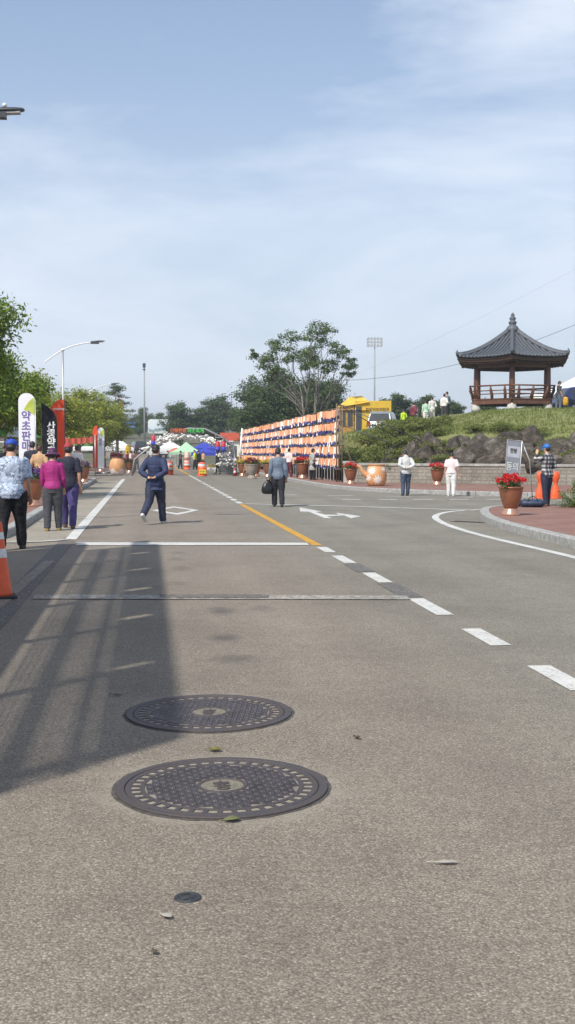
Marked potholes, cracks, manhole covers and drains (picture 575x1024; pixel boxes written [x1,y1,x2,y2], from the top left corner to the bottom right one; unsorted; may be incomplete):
manhole cover [122,694,295,733]
manhole cover [111,757,332,821]
